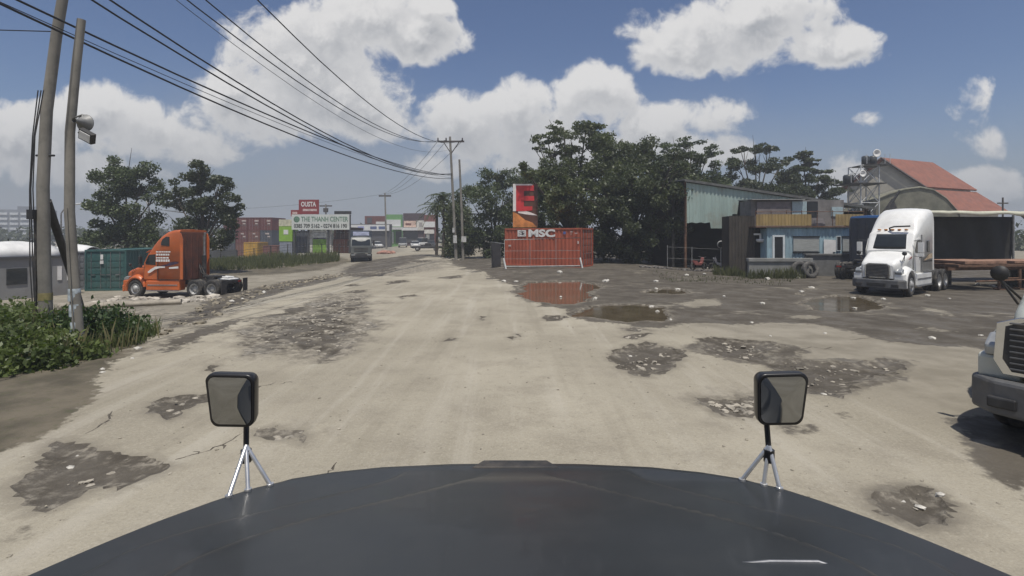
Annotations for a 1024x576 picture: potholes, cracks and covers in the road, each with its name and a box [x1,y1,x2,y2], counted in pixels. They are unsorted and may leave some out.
pothole [236,297,379,364]
pothole [144,394,208,420]
pothole [798,295,892,312]
pothole [9,441,170,513]
pothole [606,341,688,377]
pothole [510,280,605,304]
crack [175,433,242,460]
pothole [697,337,907,399]
pothole [566,303,674,322]
pothole [871,485,959,527]
pothole [694,396,755,418]
pothole [254,427,306,443]
